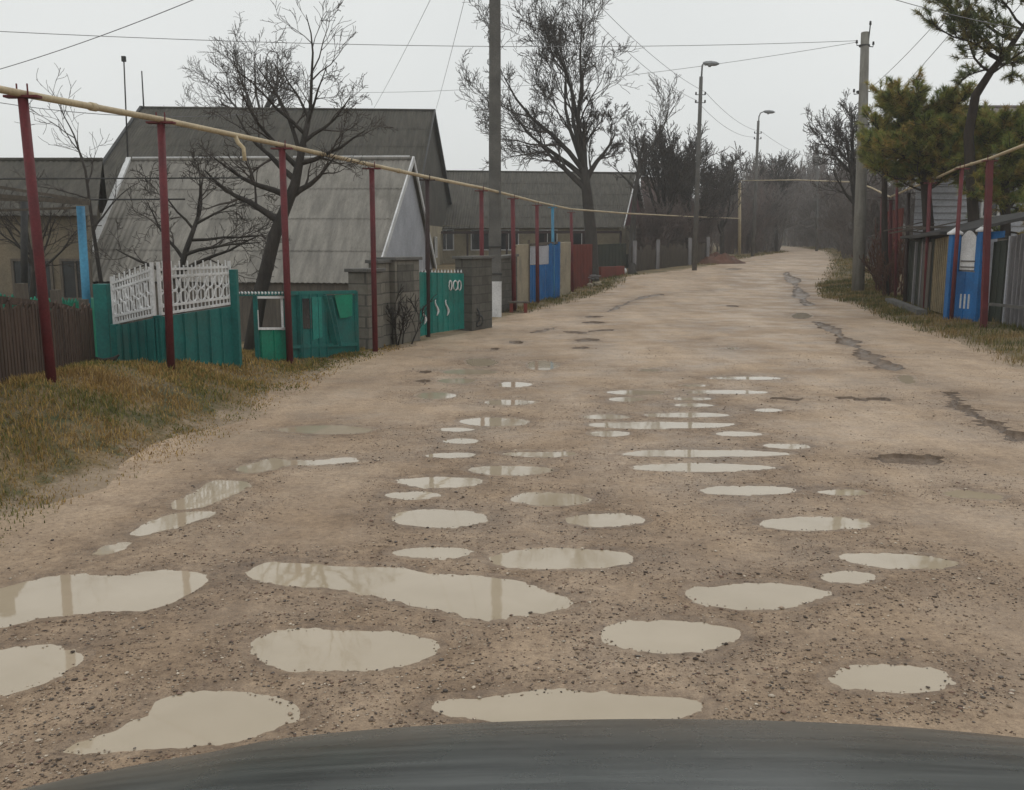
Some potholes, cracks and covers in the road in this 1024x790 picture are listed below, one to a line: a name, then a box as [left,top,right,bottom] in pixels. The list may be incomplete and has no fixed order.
pothole [123,509,223,538]
pothole [385,507,496,530]
pothole [229,455,363,475]
pothole [237,624,447,676]
pothole [48,681,308,759]
pothole [816,657,962,698]
pothole [229,556,582,623]
pothole [828,549,969,571]
pothole [0,640,96,699]
pothole [479,543,645,572]
pothole [869,453,945,465]
pothole [164,478,255,510]
